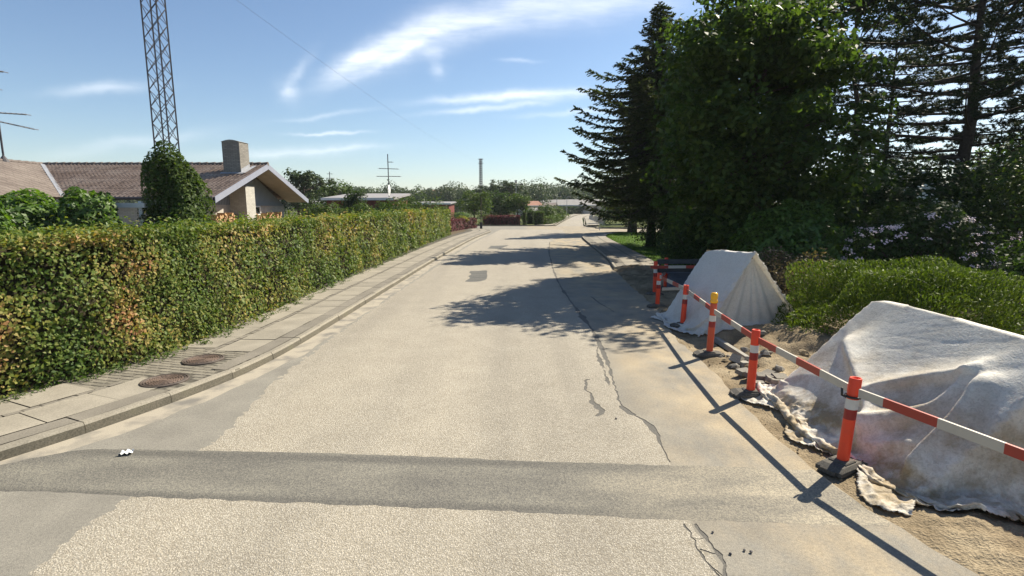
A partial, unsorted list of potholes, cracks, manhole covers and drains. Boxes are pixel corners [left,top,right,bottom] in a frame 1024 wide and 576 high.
crack [683,524,727,576]
crack [548,242,670,462]
manhole cover [181,354,224,366]
manhole cover [139,373,190,388]
